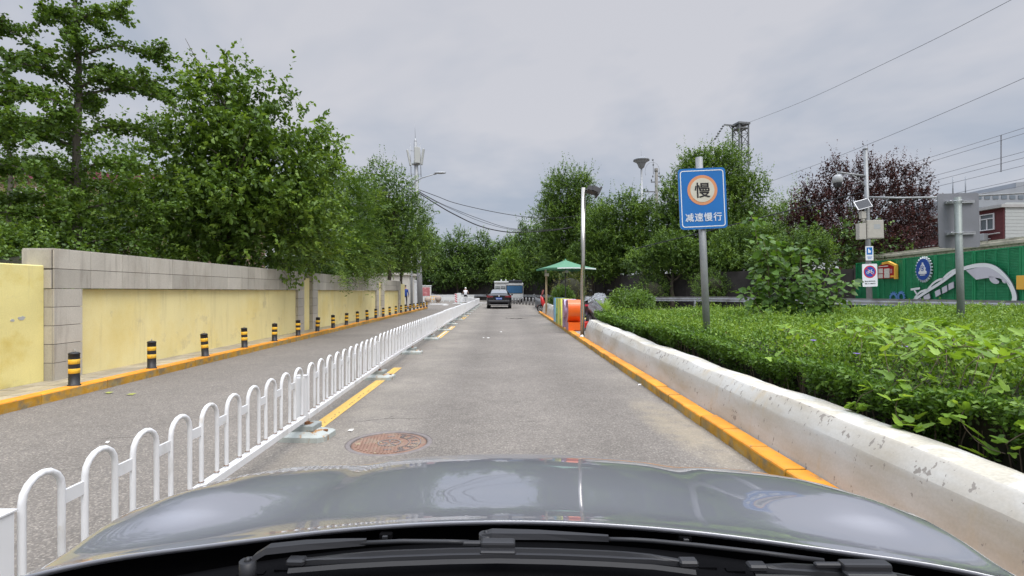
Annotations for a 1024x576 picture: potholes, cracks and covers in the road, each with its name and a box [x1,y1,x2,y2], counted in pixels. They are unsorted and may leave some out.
manhole cover [345,431,433,456]
